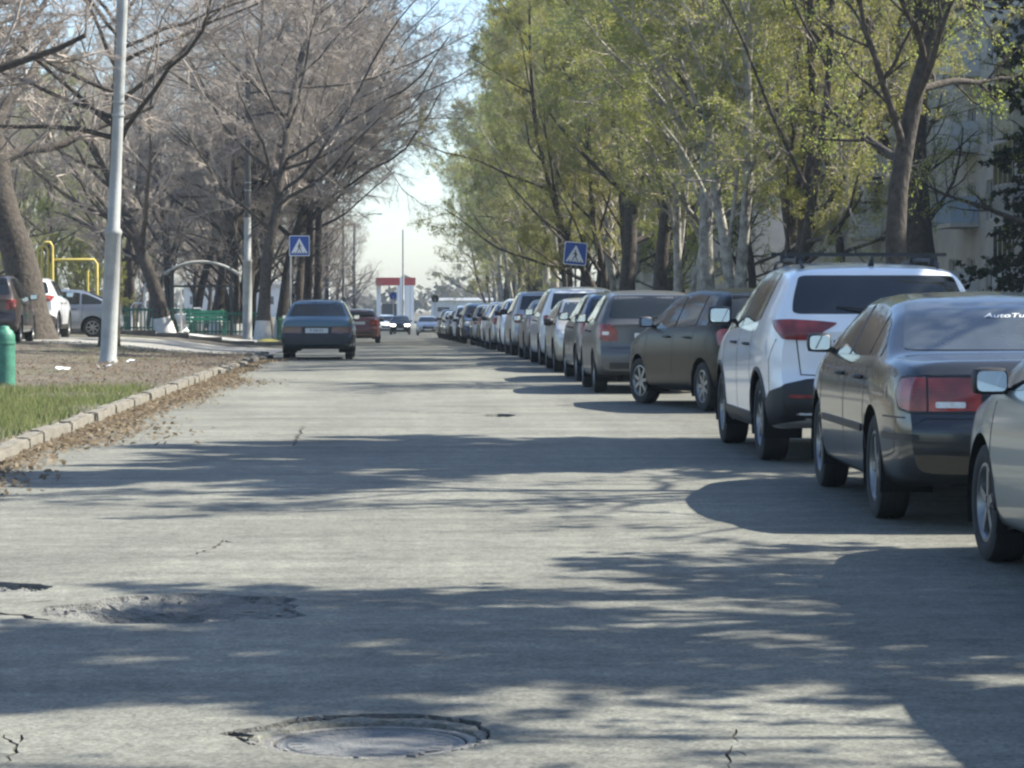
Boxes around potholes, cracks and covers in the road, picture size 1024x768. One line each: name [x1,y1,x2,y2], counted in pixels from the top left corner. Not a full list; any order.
pothole [39,593,307,624]
crack [2,735,24,764]
pothole [0,582,53,592]
crack [725,729,747,768]
crack [187,540,229,556]
manhole cover [260,726,480,759]
crack [292,426,305,446]
